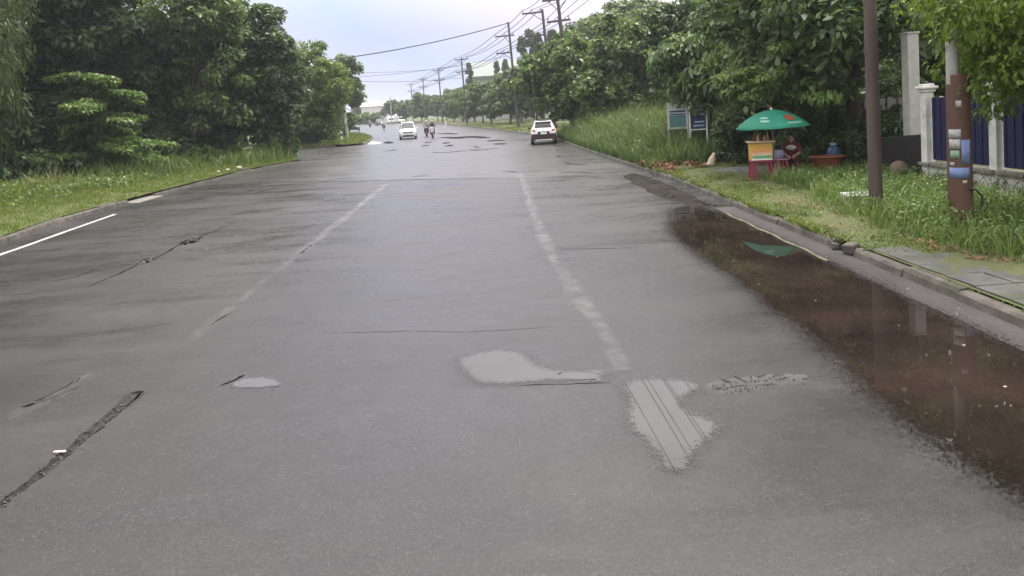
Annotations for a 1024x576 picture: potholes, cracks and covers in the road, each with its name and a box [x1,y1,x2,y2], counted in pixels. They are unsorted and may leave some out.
pothole [698,374,819,396]
crack [56,224,230,289]
